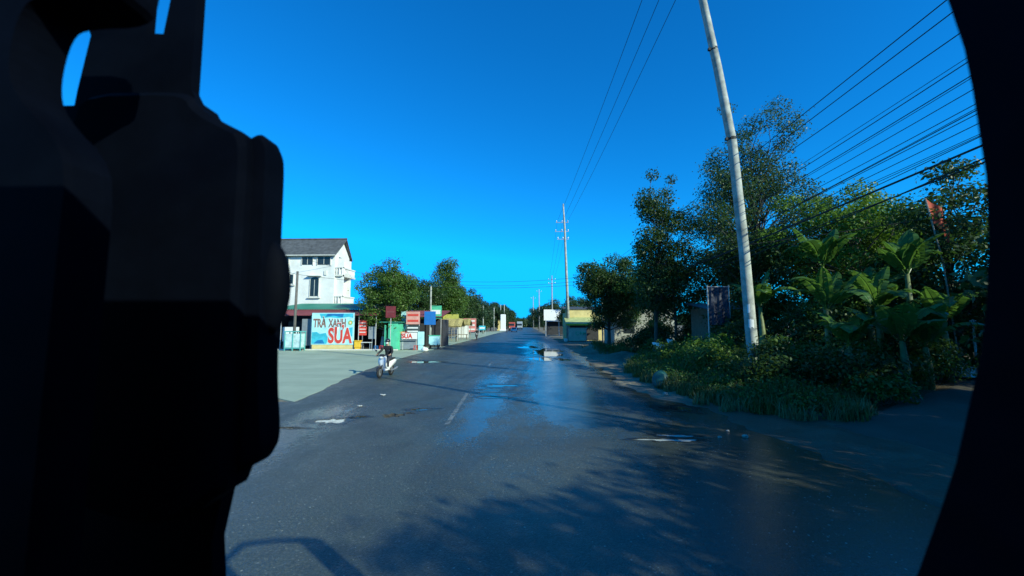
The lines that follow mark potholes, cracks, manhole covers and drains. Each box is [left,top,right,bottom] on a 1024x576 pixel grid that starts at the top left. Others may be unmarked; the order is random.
pothole [303,417,354,425]
pothole [528,348,566,357]
